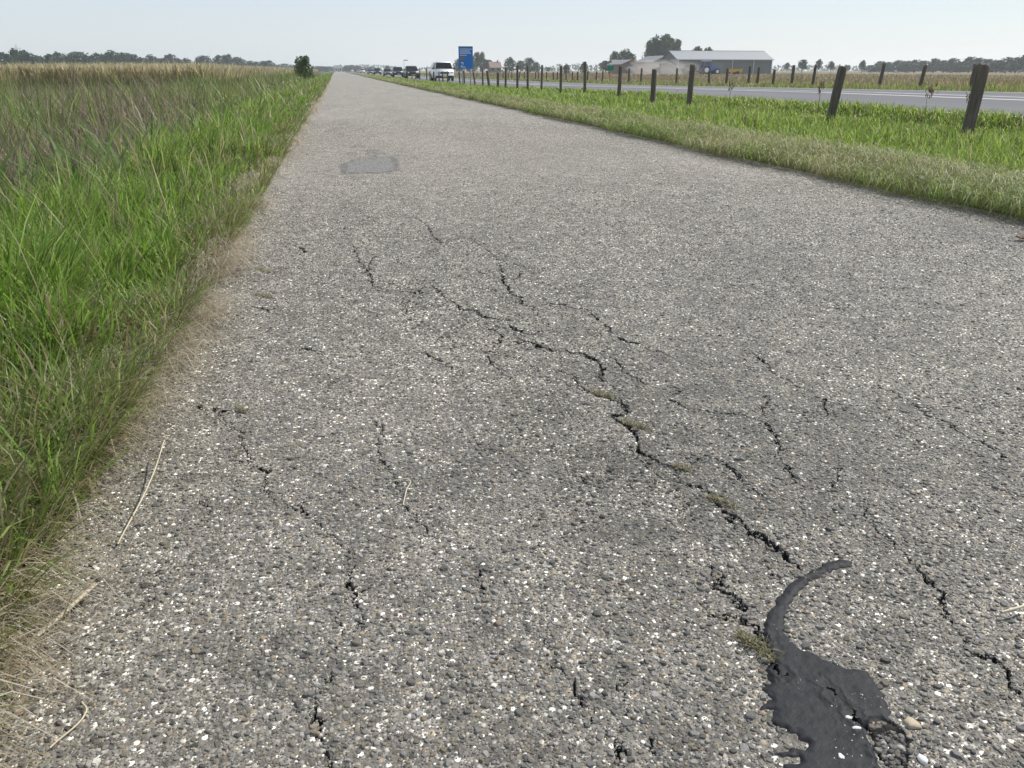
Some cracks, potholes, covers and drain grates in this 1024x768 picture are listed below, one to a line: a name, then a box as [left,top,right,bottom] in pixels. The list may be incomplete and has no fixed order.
crack [431,242,883,761]
crack [192,403,237,413]
crack [879,387,1007,458]
crack [353,246,422,313]
crack [829,467,1022,695]
crack [218,413,366,768]
crack [372,421,436,539]
